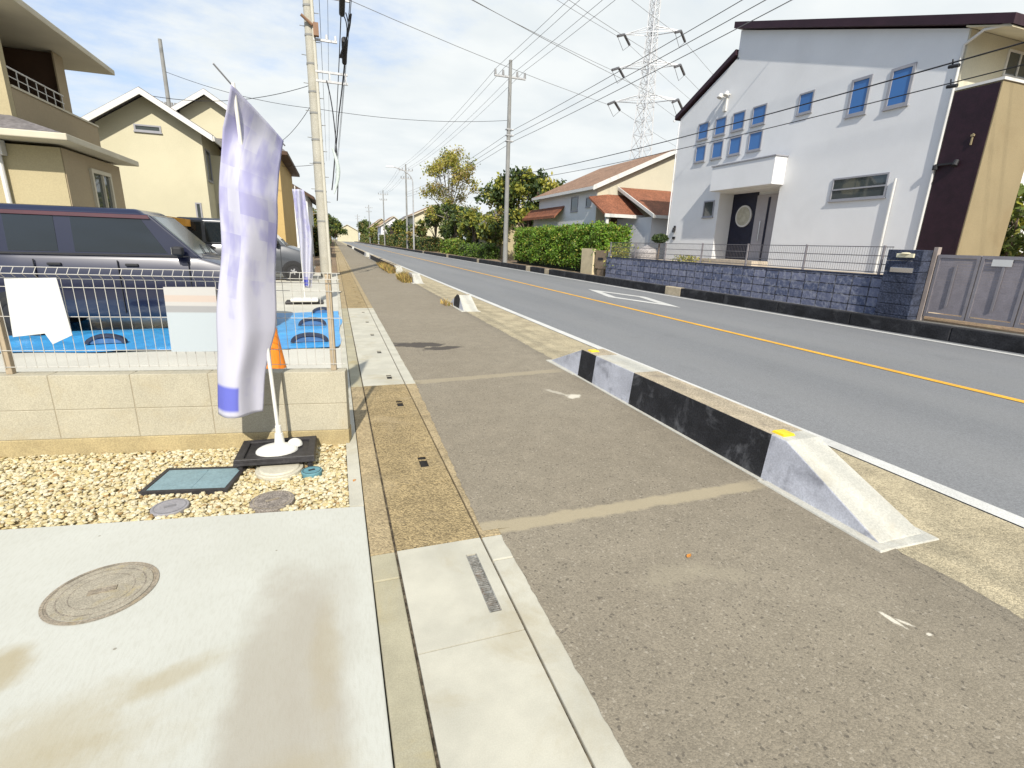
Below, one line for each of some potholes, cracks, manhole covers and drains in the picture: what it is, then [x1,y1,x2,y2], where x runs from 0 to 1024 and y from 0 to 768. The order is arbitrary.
manhole cover [38,562,159,626]
